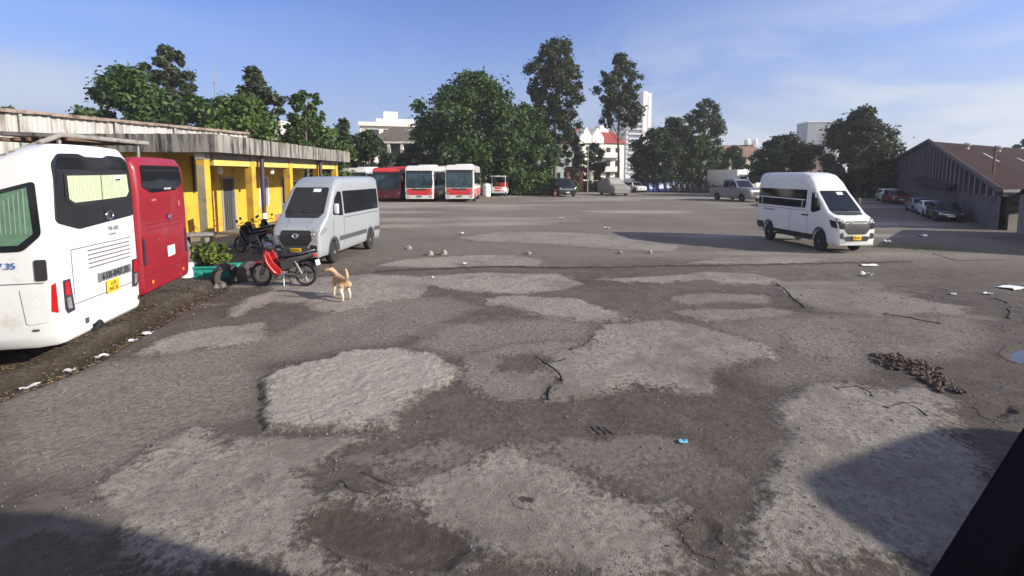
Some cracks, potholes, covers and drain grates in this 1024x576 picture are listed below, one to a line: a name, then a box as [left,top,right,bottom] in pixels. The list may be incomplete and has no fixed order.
crack [834,385,929,416]
crack [773,284,807,308]
crack [534,338,591,401]
crack [884,313,941,325]
pothole [998,342,1024,365]
